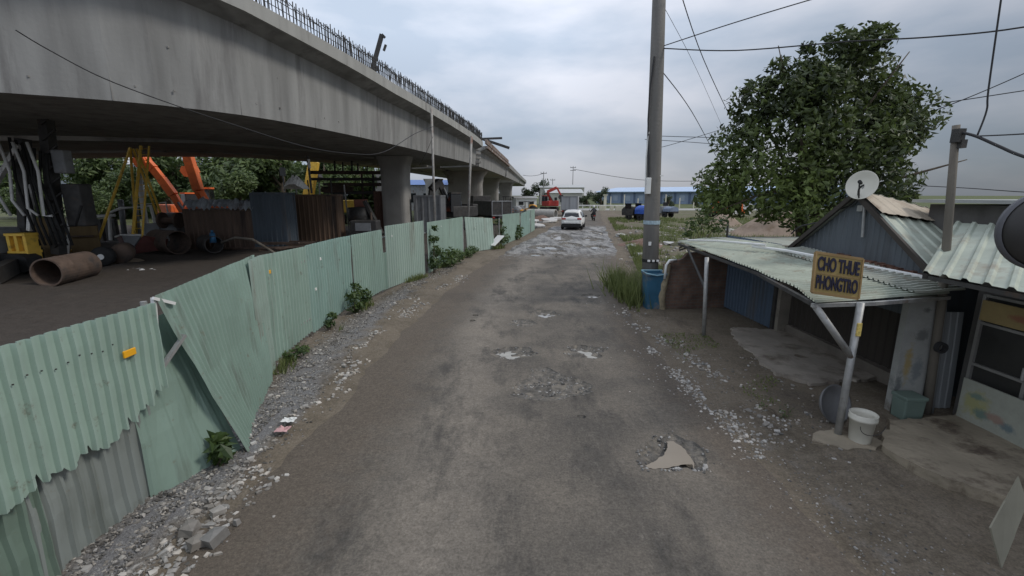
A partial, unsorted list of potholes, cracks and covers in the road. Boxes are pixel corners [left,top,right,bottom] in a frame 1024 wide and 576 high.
pothole [560,345,609,359]
pothole [490,347,538,360]
pothole [546,233,574,242]
pothole [531,310,561,318]
pothole [636,431,709,474]
pothole [510,367,593,401]
